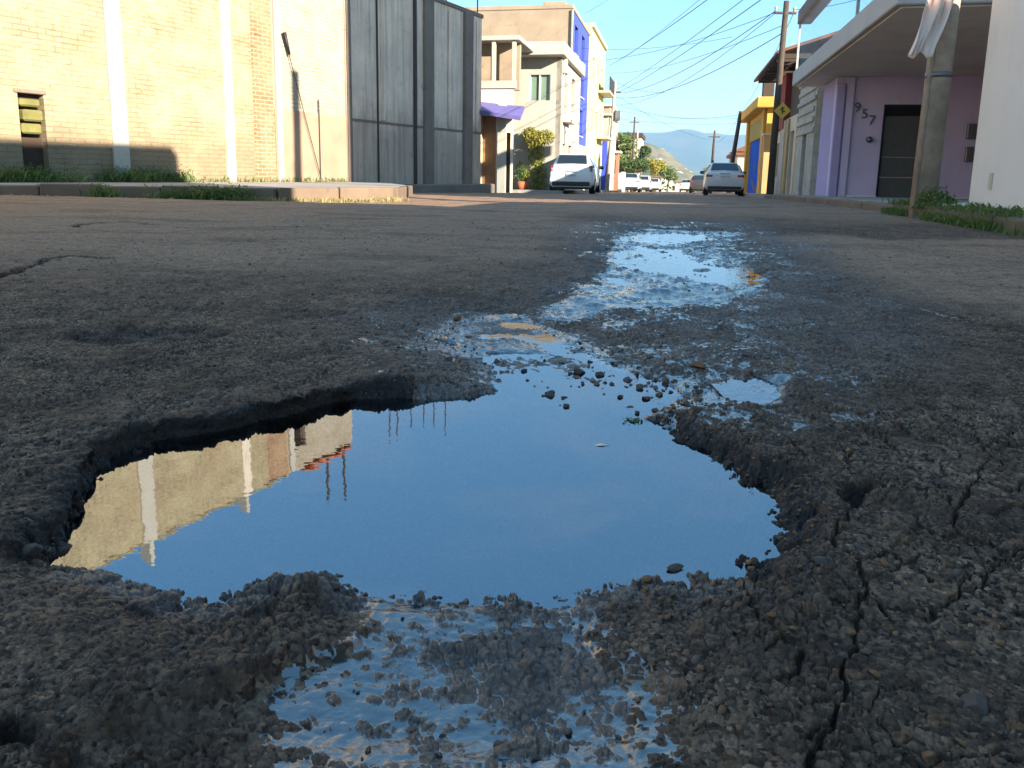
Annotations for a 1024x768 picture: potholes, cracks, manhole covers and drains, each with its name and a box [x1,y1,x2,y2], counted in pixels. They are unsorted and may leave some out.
pothole [522,228,783,325]
pothole [0,313,829,642]
crack [712,401,1024,768]
crack [0,255,117,278]
